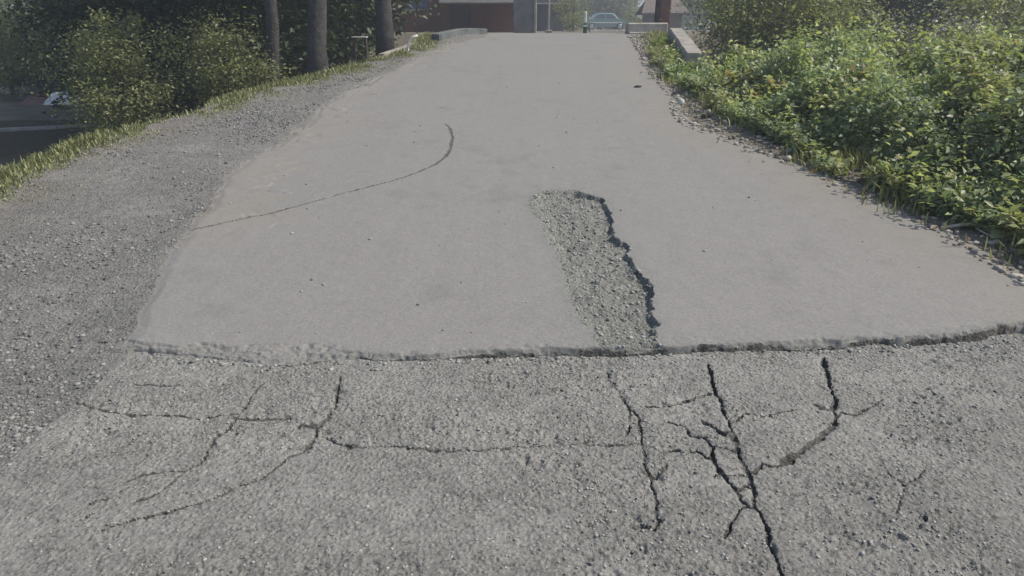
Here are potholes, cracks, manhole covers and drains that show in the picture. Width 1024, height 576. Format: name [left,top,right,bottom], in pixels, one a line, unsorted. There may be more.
crack [190,124,454,231]
pothole [527,189,662,352]
crack [76,324,1016,576]
